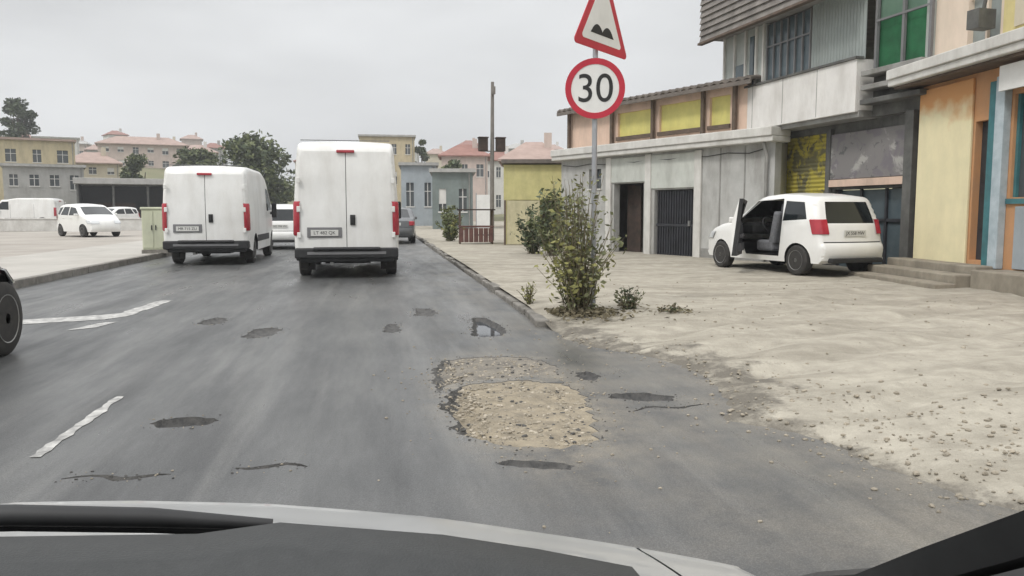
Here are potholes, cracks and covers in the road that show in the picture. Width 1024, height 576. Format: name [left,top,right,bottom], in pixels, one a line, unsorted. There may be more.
pothole [438,380,600,449]
pothole [150,417,219,428]
pothole [608,392,674,402]
pothole [471,318,507,337]
pothole [576,371,602,381]
pothole [415,308,437,316]
pothole [382,324,401,333]
crack [62,462,308,481]
pothole [497,460,574,470]
crack [633,404,703,412]
pothole [241,327,282,339]
pothole [430,356,559,395]
